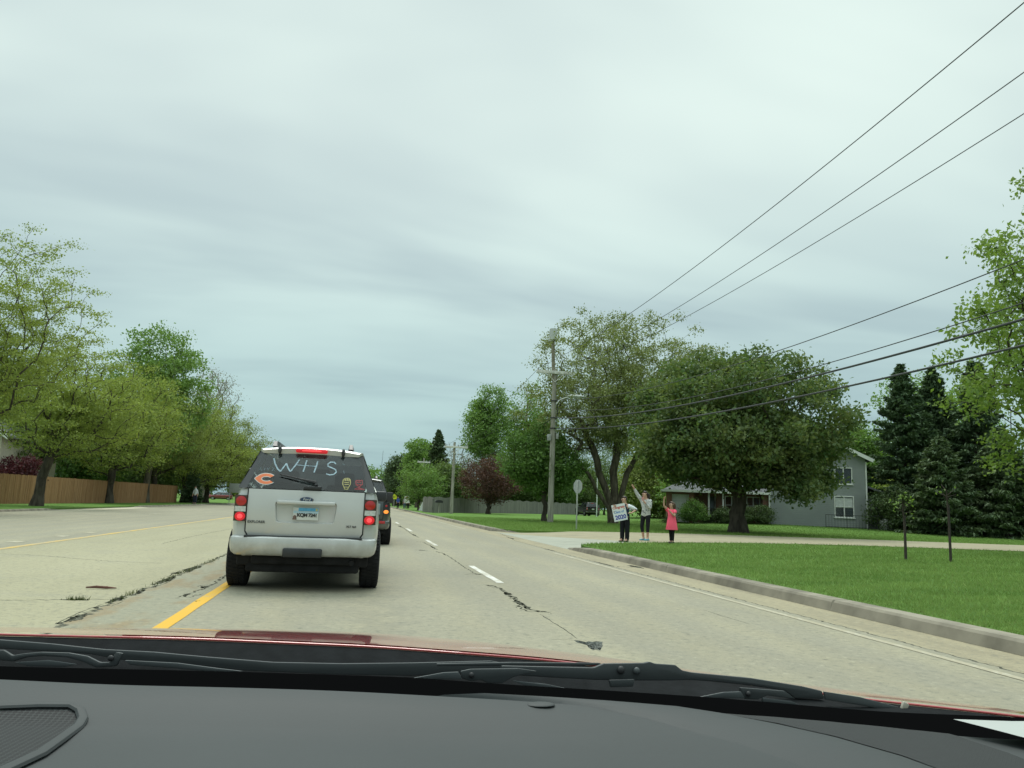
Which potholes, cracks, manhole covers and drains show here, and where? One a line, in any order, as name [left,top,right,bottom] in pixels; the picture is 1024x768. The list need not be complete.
crack [395,524,550,613]
crack [11,554,227,634]
